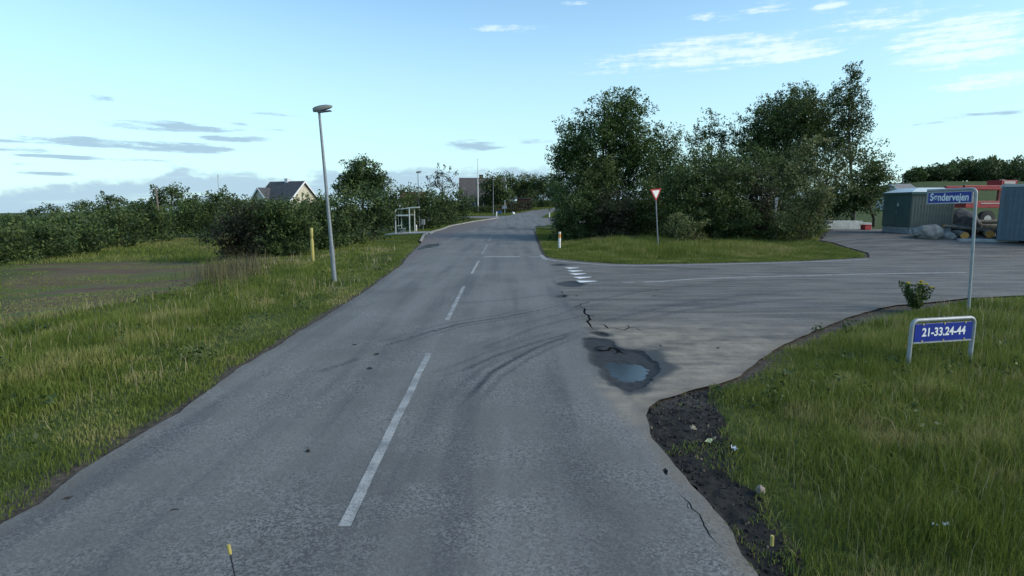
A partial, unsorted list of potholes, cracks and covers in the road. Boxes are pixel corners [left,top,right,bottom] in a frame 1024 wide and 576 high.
pothole [583,337,662,392]
crack [679,494,722,548]
